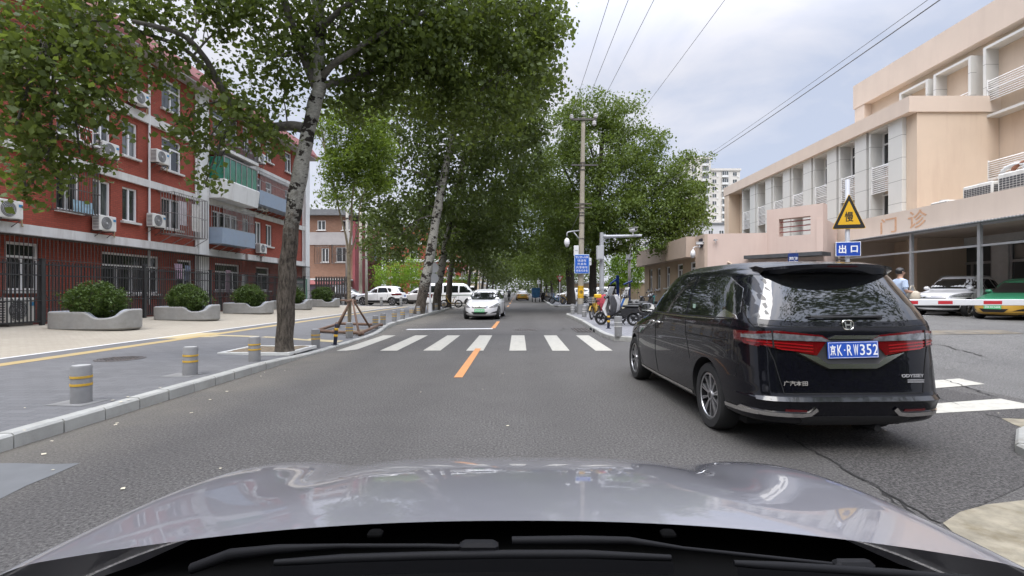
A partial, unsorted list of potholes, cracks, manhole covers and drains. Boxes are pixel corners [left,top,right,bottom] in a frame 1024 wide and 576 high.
crack [785,434,940,523]
